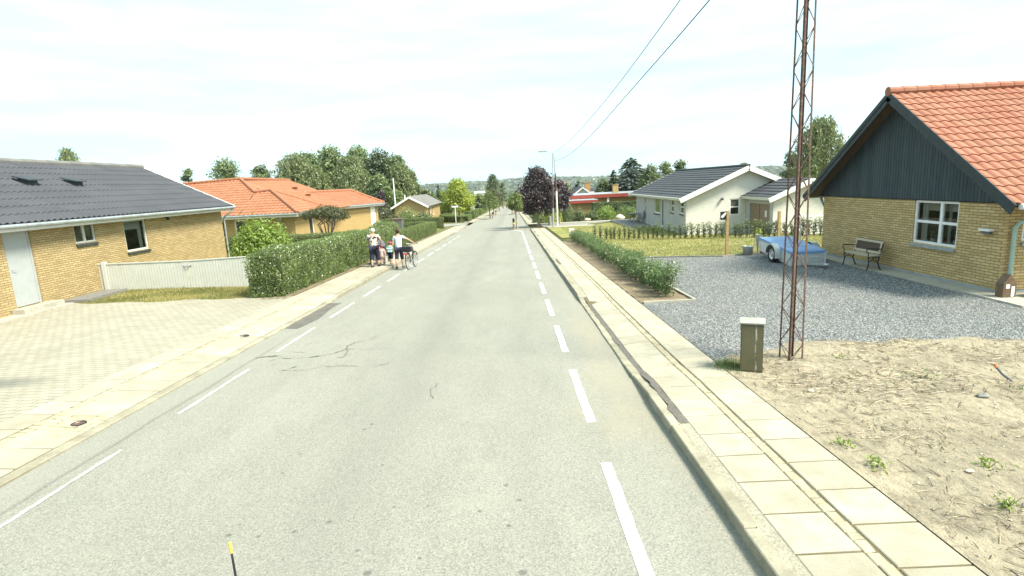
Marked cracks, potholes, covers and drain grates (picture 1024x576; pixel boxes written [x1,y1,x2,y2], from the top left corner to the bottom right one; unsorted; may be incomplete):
crack [258,335,396,371]
